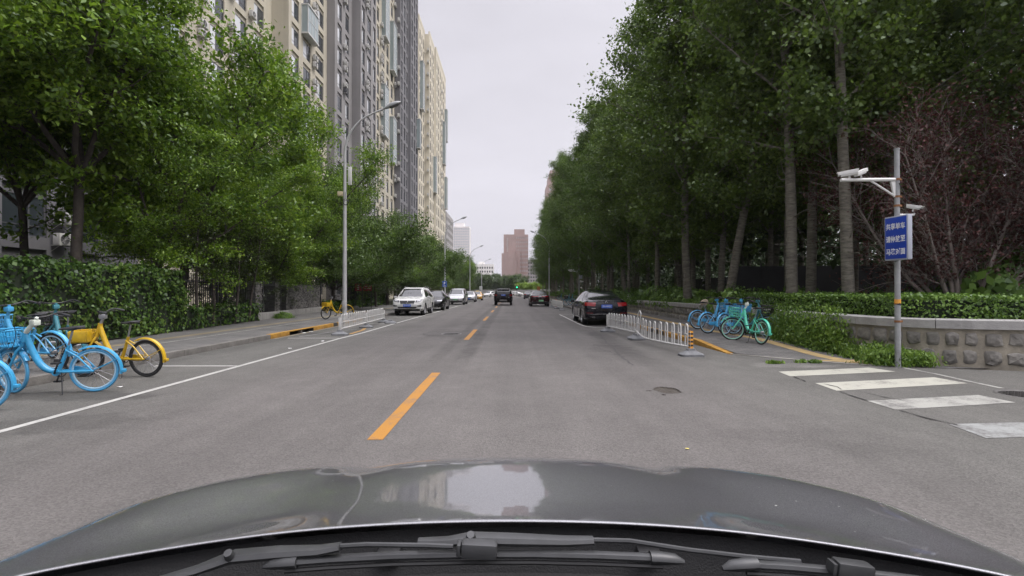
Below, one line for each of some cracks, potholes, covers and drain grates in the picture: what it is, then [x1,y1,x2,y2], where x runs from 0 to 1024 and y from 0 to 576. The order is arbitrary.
manhole cover [993,390,1024,398]
